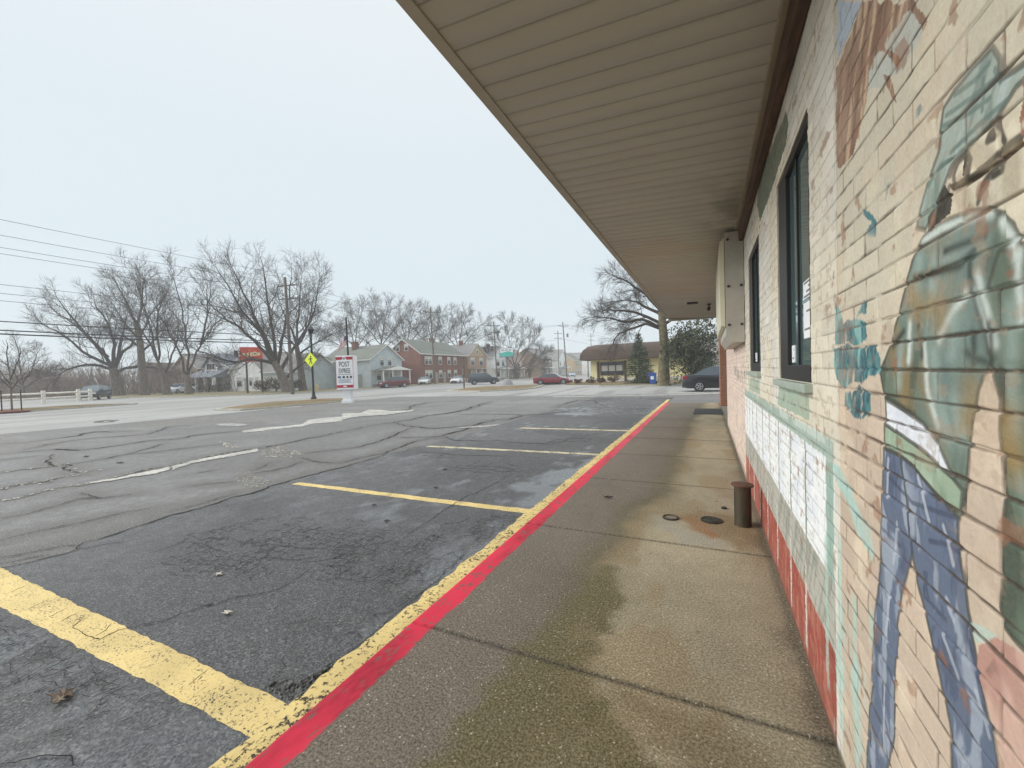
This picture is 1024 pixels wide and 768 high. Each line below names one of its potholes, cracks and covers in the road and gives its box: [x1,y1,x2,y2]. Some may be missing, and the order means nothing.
crack [138,516,421,584]
manhole cover [700,516,723,524]
pothole [263,661,337,704]
crack [0,400,646,568]
